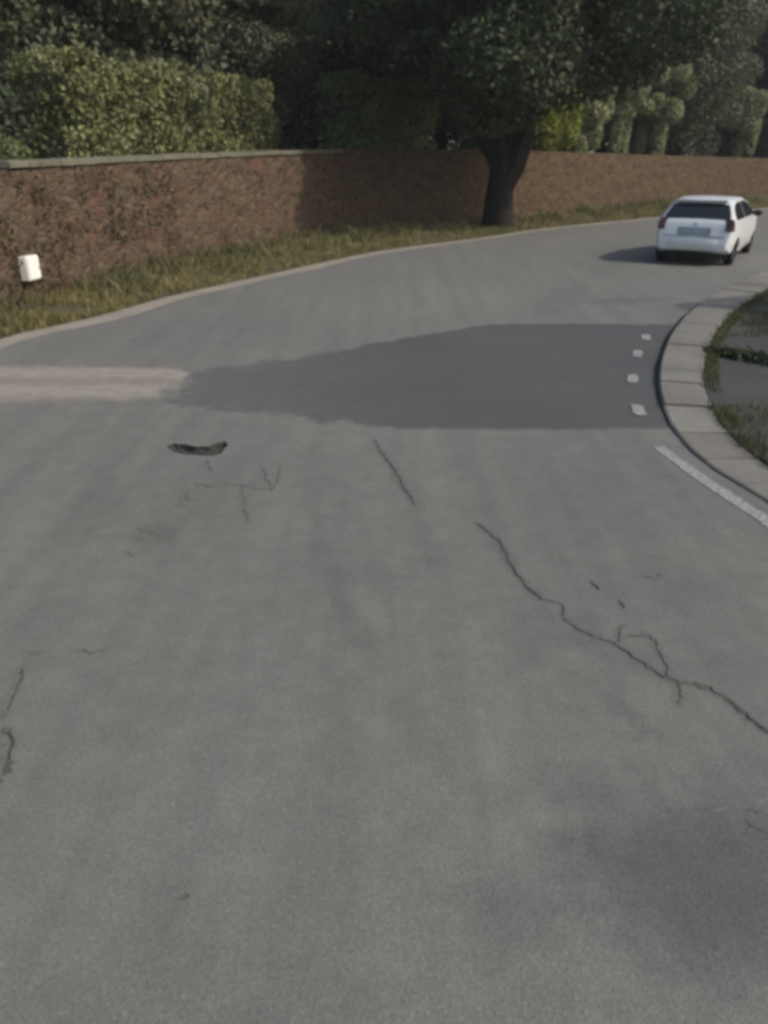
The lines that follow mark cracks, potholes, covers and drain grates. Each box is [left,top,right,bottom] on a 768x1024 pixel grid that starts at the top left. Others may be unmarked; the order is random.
crack [698,806,768,836]
crack [374,440,414,504]
pothole [164,441,228,456]
crack [475,522,768,734]
crack [127,460,282,557]
crack [0,649,102,784]
